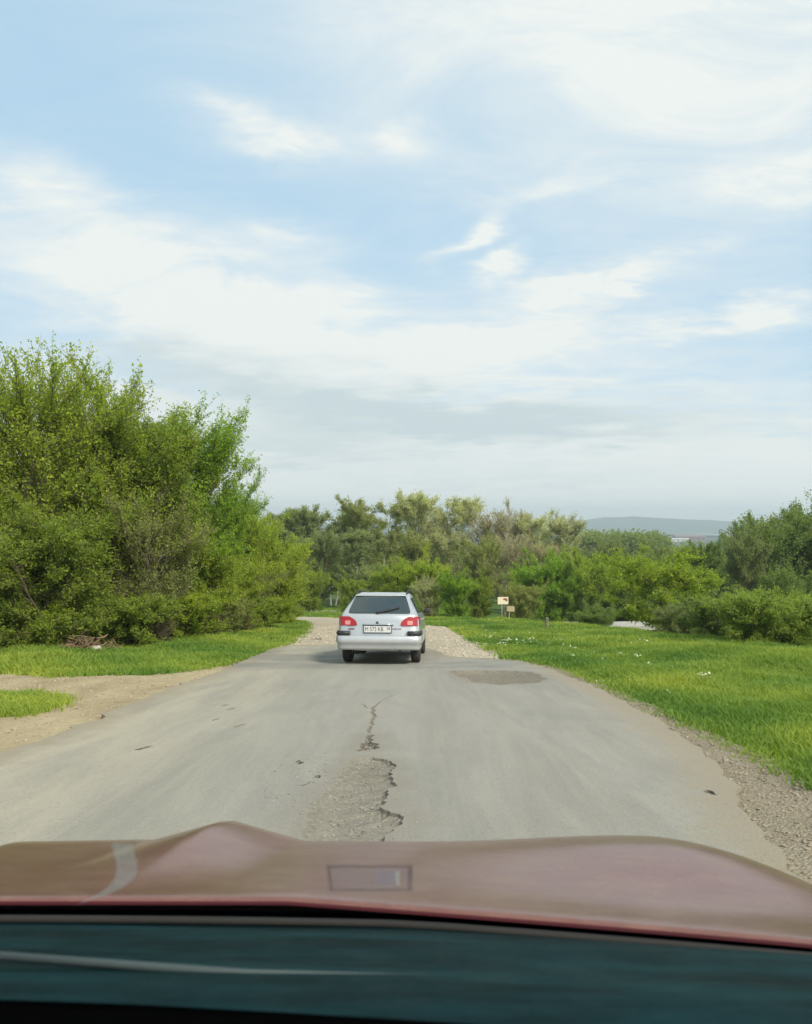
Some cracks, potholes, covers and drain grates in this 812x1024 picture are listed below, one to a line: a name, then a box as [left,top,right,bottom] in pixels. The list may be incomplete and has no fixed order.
crack [362,692,403,733]
pothole [301,757,404,841]
